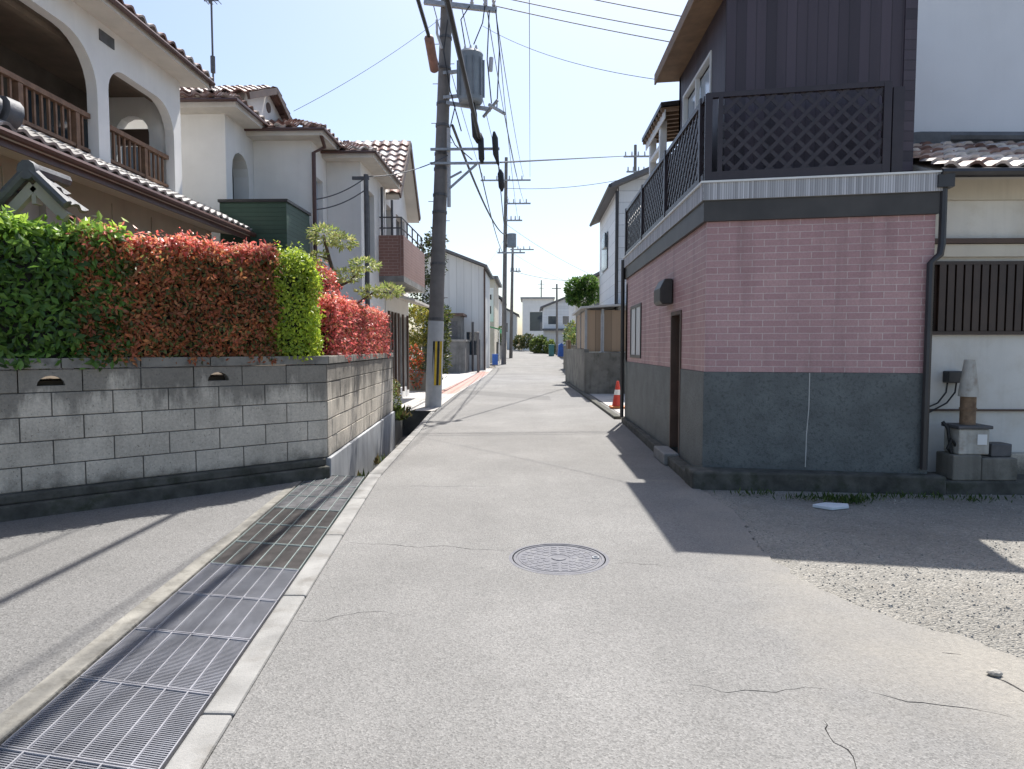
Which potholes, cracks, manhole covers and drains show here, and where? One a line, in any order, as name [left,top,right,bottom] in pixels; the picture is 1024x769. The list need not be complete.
drain grate [256,507,340,529]
drain grate [0,746,136,769]
drain grate [178,563,299,604]
drain grate [80,628,250,699]
drain grate [136,591,277,644]
drain grate [288,484,357,501]
drain grate [211,541,315,572]
crack [824,720,857,769]
drain grate [301,475,364,489]
crack [865,690,1012,718]
drain grate [236,523,329,549]
manhole cover [509,543,609,575]
